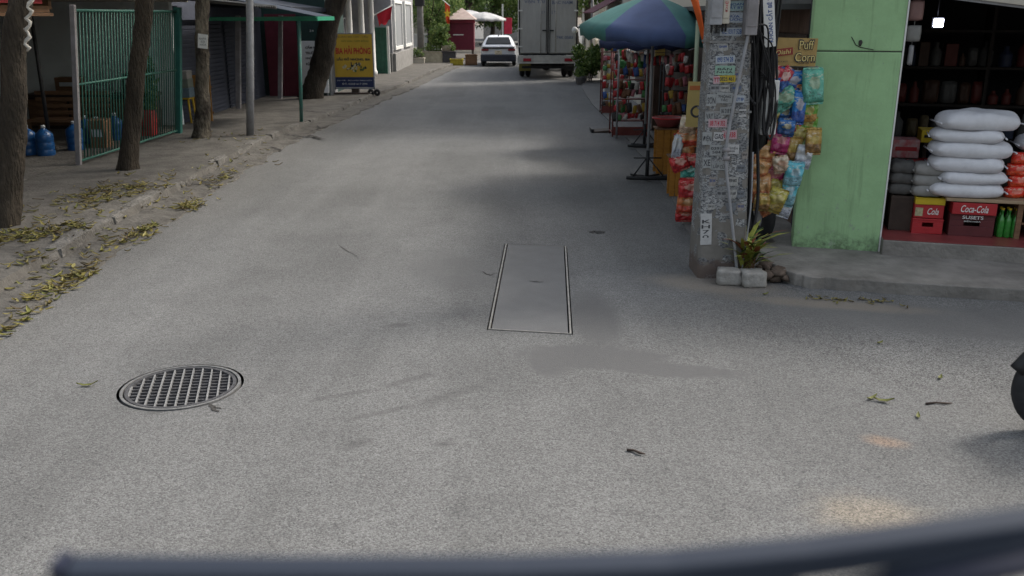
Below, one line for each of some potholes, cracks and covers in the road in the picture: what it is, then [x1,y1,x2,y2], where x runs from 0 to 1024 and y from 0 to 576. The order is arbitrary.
utility cover [488,244,573,335]
